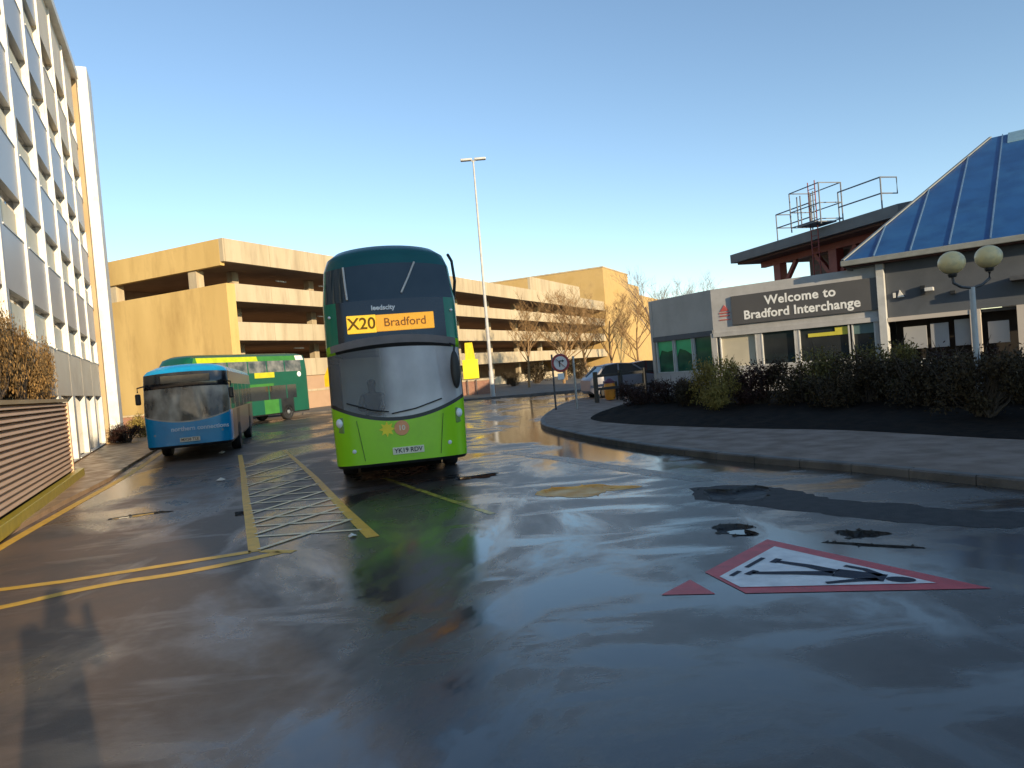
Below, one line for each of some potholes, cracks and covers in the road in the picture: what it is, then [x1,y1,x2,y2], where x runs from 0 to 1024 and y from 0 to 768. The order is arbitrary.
pothole [455,472,497,481]
pothole [711,523,759,536]
pothole [835,528,893,539]
